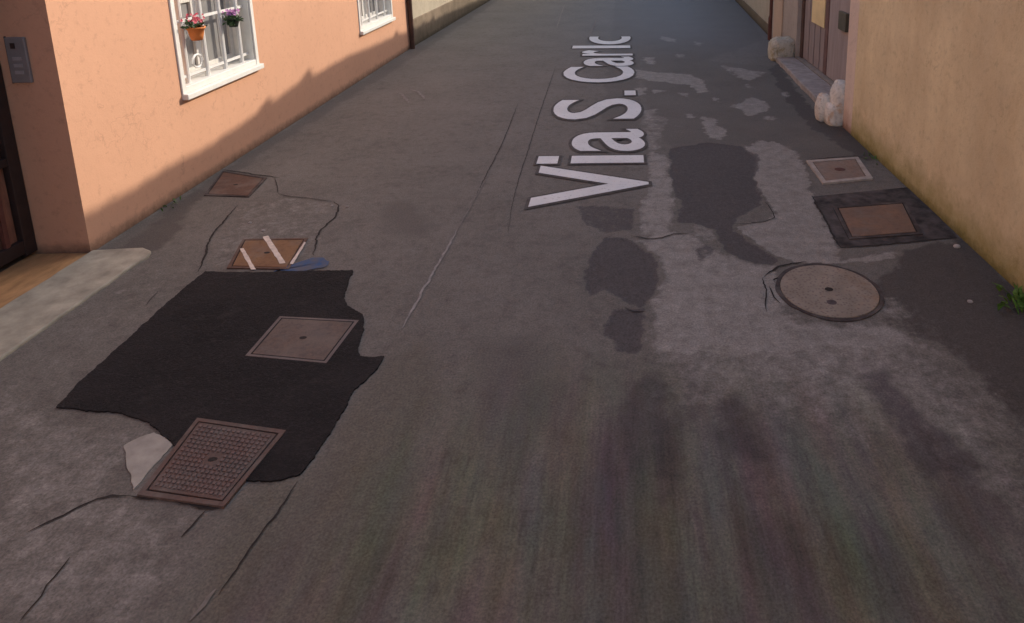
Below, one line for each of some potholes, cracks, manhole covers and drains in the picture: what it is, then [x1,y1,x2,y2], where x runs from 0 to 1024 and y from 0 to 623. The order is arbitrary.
manhole cover [137,418,286,509]
manhole cover [245,316,359,363]
manhole cover [227,238,308,270]
manhole cover [833,202,923,240]
manhole cover [775,263,885,322]
crack [198,206,237,271]
manhole cover [204,171,267,197]
manhole cover [806,157,873,185]
crack [227,170,339,255]
crack [28,481,298,594]
crack [21,557,70,619]
